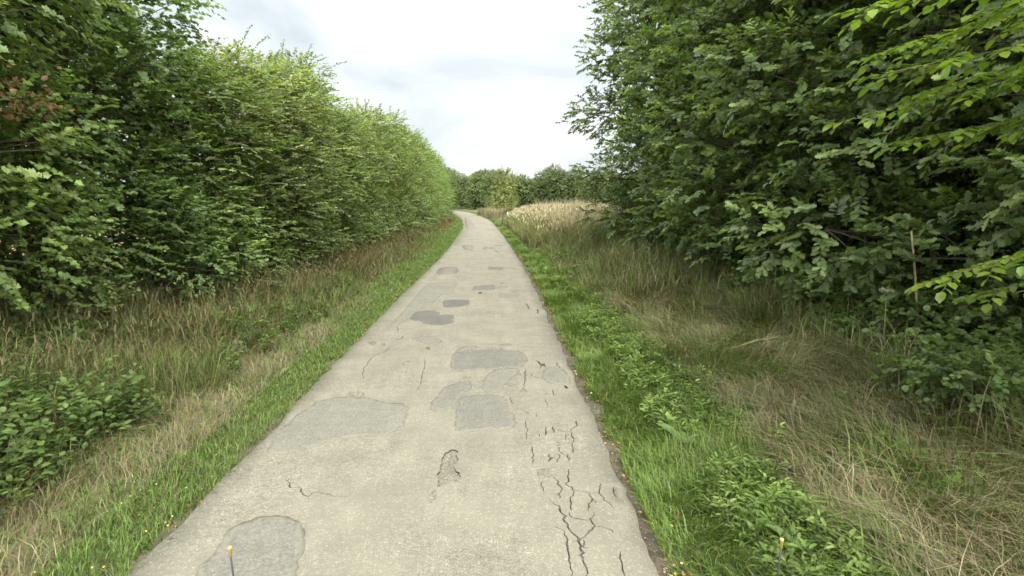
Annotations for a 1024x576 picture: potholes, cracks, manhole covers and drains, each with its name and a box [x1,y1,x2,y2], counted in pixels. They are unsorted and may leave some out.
pothole [437,449,461,487]
crack [509,369,625,576]
